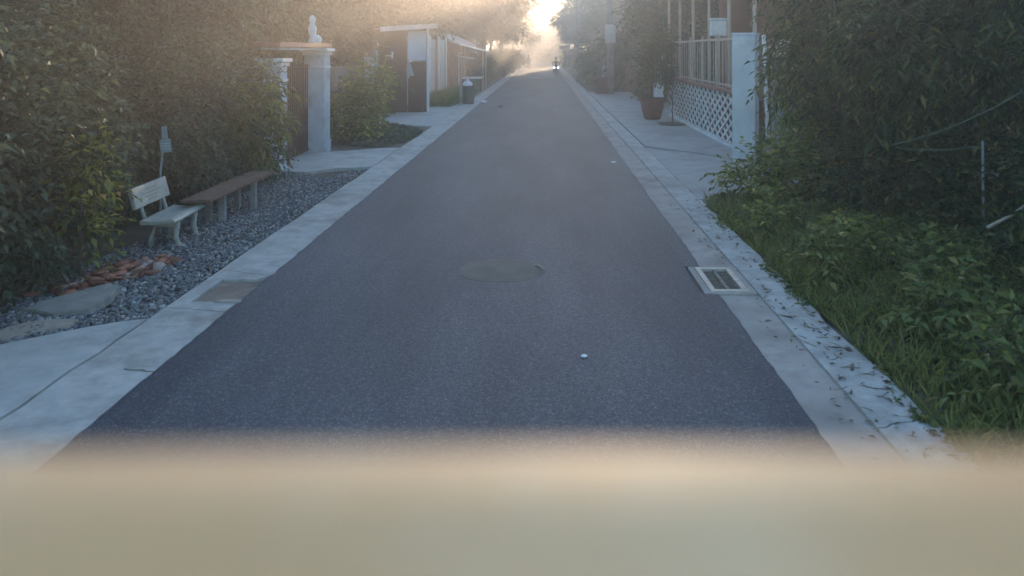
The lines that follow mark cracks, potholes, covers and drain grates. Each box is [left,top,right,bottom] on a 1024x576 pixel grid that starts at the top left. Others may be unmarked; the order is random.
drain grate [687,267,758,296]
manhole cover [459,259,547,282]
